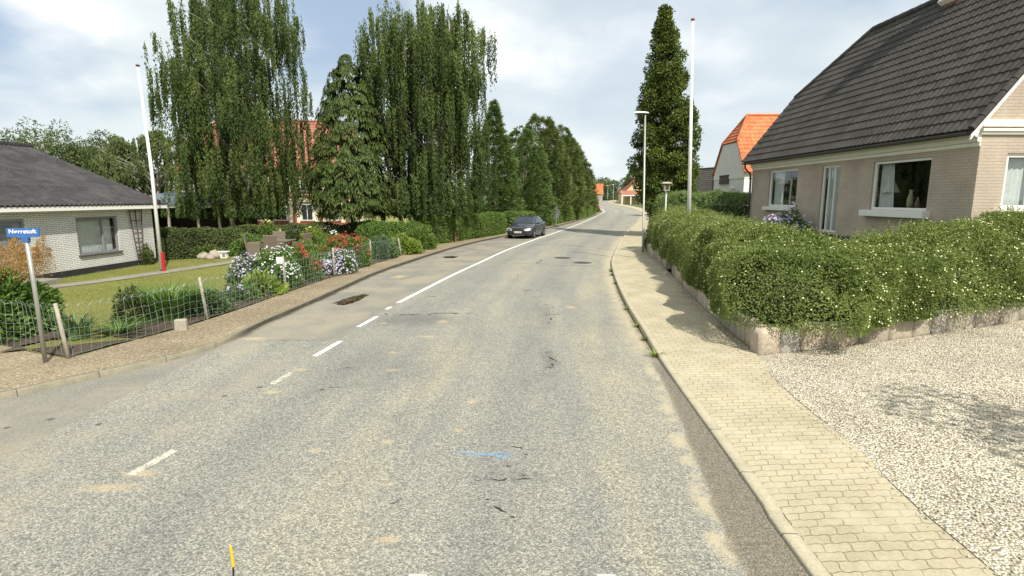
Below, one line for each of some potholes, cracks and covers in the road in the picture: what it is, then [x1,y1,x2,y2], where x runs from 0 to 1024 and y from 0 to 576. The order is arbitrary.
pothole [332,294,369,305]
crack [477,446,531,481]
